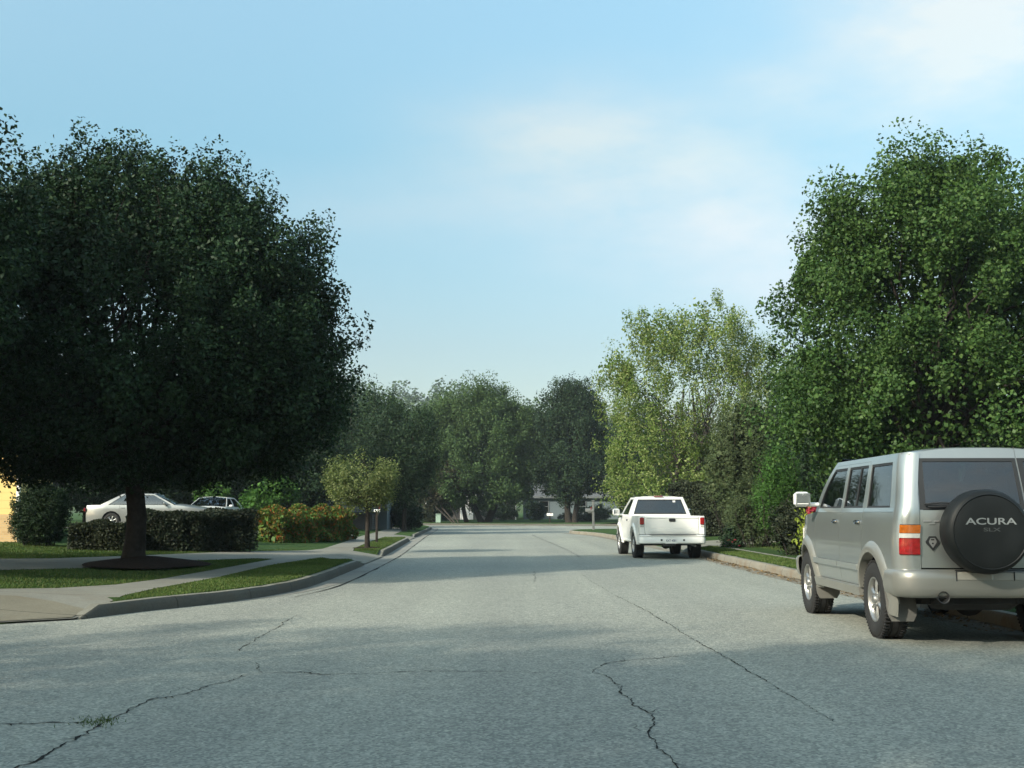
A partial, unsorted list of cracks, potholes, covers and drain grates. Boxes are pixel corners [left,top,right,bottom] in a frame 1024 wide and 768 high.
crack [592,656,682,768]
crack [6,663,514,768]
